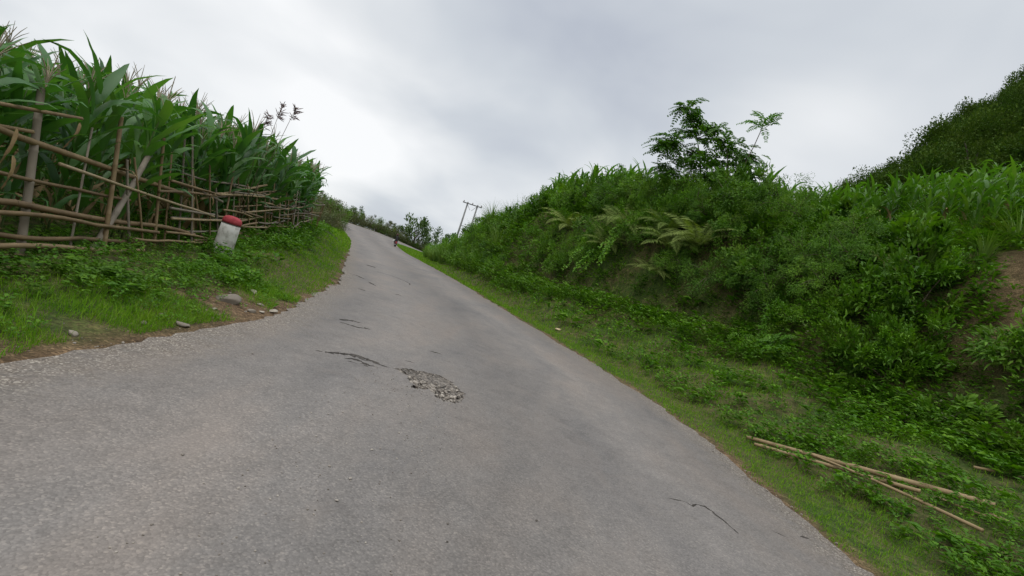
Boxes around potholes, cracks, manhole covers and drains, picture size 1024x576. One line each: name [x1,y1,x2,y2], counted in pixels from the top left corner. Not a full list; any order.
crack [315,350,413,368]
pothole [393,368,465,404]
crack [670,498,738,533]
